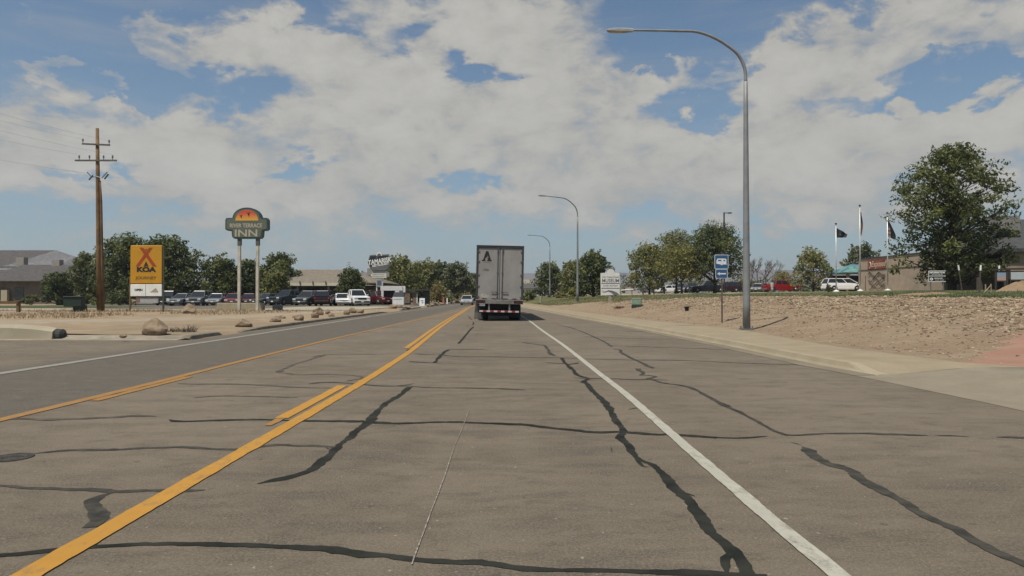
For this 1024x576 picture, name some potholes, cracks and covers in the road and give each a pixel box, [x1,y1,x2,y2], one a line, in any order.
manhole cover [0,453,35,462]
